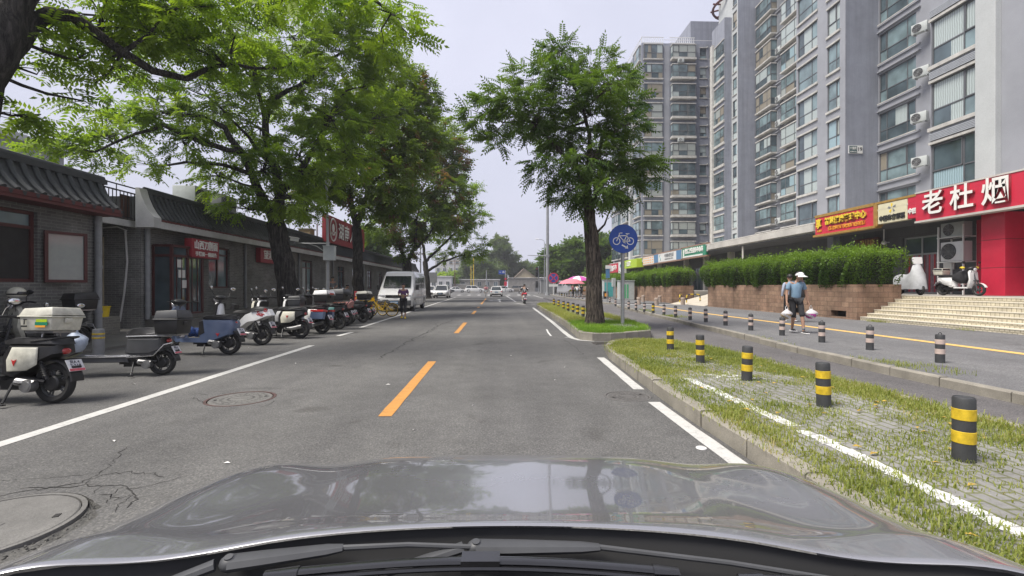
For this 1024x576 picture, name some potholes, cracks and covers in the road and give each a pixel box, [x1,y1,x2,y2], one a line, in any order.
manhole cover [604,391,651,402]
manhole cover [0,493,88,553]
manhole cover [203,391,277,407]
crack [1,447,185,511]
